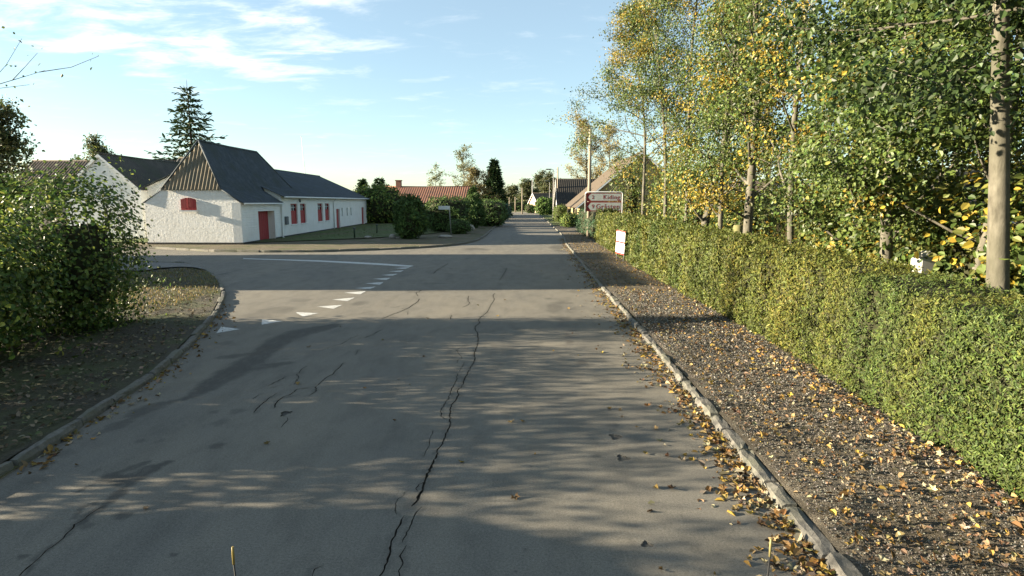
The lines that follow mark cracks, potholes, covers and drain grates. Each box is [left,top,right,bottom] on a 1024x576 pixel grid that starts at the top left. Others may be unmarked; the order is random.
crack [379,293,495,576]
crack [19,505,105,576]
crack [253,290,421,412]
